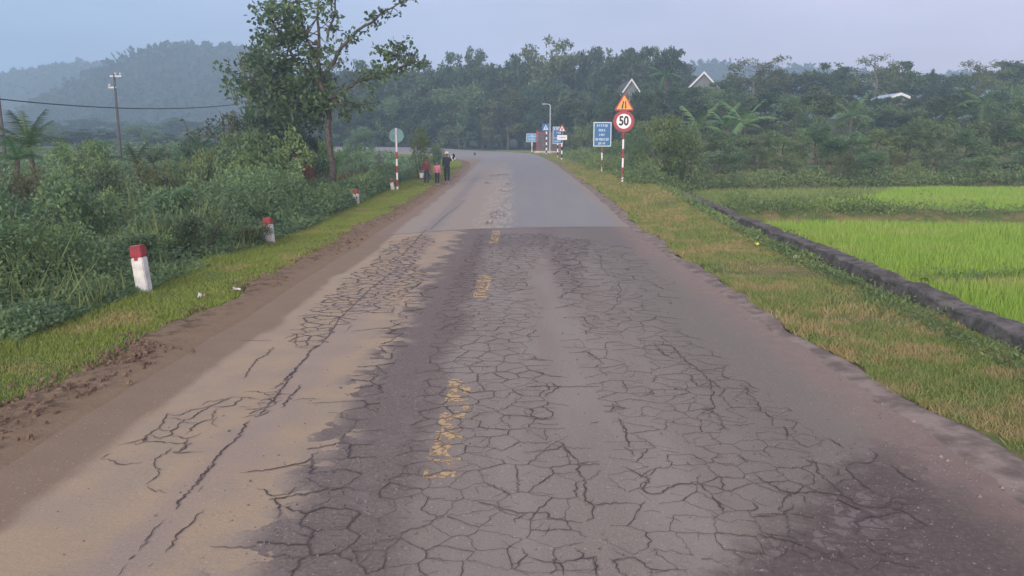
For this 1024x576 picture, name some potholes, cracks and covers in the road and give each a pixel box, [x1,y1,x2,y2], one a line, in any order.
crack [101,200,928,576]
